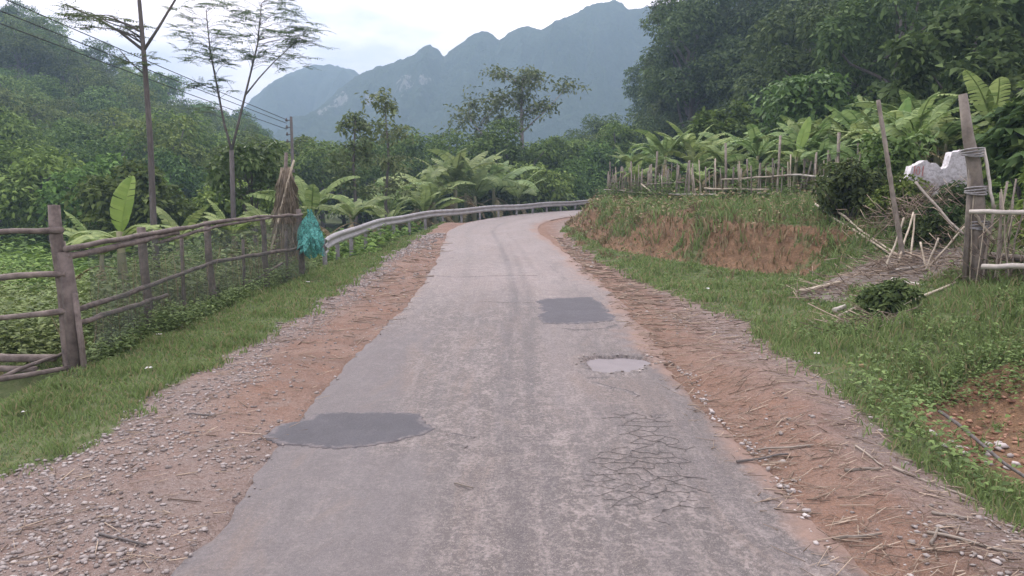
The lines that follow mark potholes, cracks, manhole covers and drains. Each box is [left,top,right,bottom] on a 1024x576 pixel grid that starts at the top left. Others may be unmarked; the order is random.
pothole [568,352,666,377]
crack [583,412,709,525]
